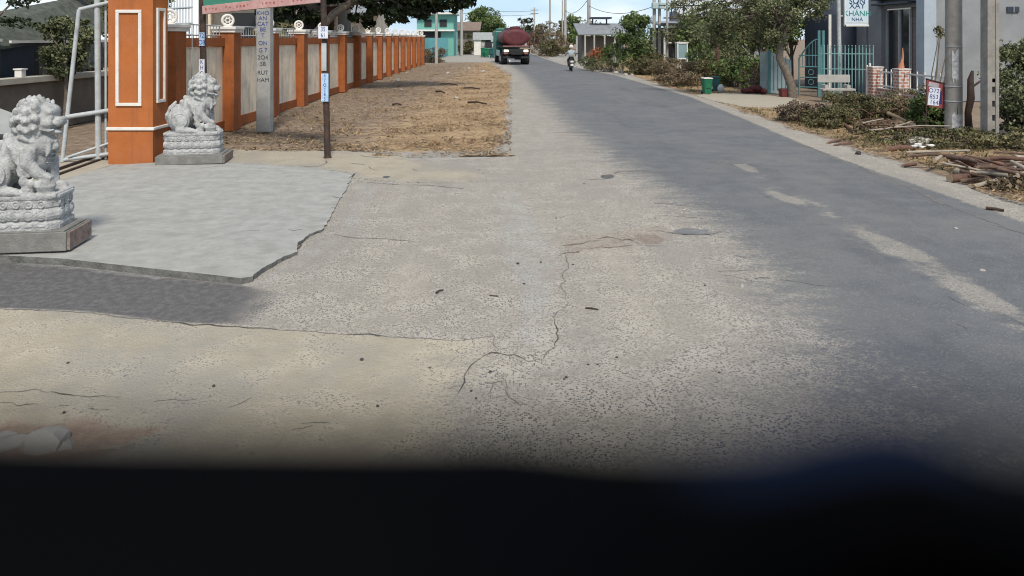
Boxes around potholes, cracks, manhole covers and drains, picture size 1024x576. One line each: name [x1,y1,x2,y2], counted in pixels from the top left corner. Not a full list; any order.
crack [0,389,114,410]
crack [272,236,630,405]
